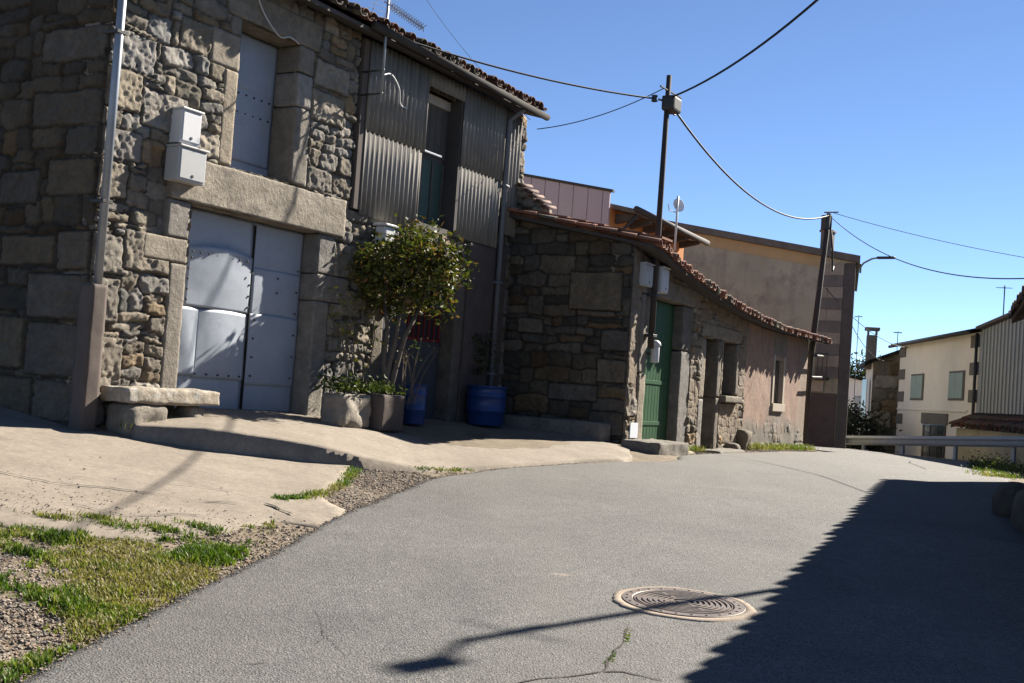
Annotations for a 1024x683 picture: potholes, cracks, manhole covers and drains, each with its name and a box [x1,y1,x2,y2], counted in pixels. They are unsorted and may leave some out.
crack [517,627,663,683]
manhole cover [612,586,757,622]
